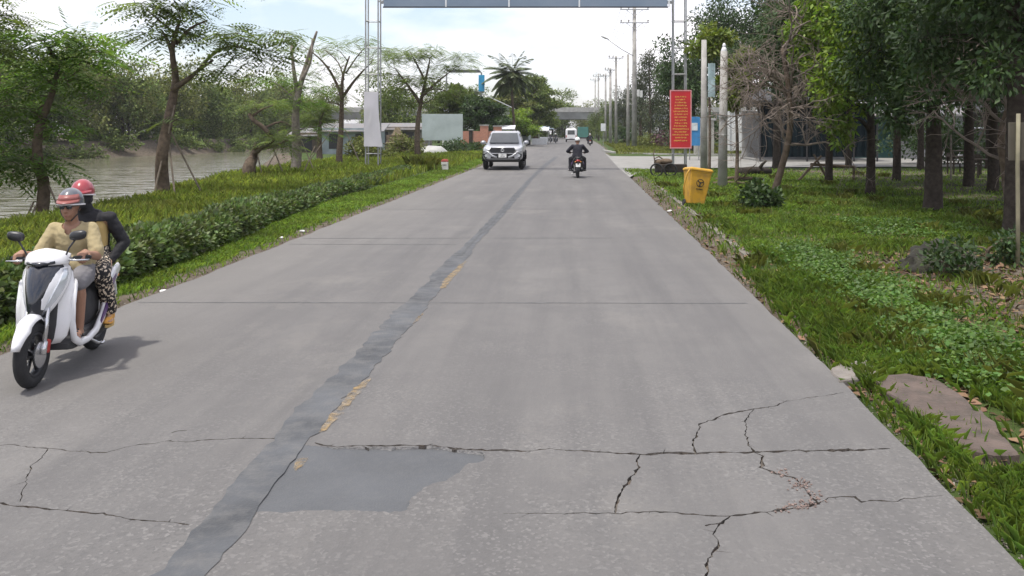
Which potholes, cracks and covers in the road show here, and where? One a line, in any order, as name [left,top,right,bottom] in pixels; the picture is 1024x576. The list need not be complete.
crack [0,430,275,525]
crack [316,394,941,576]
